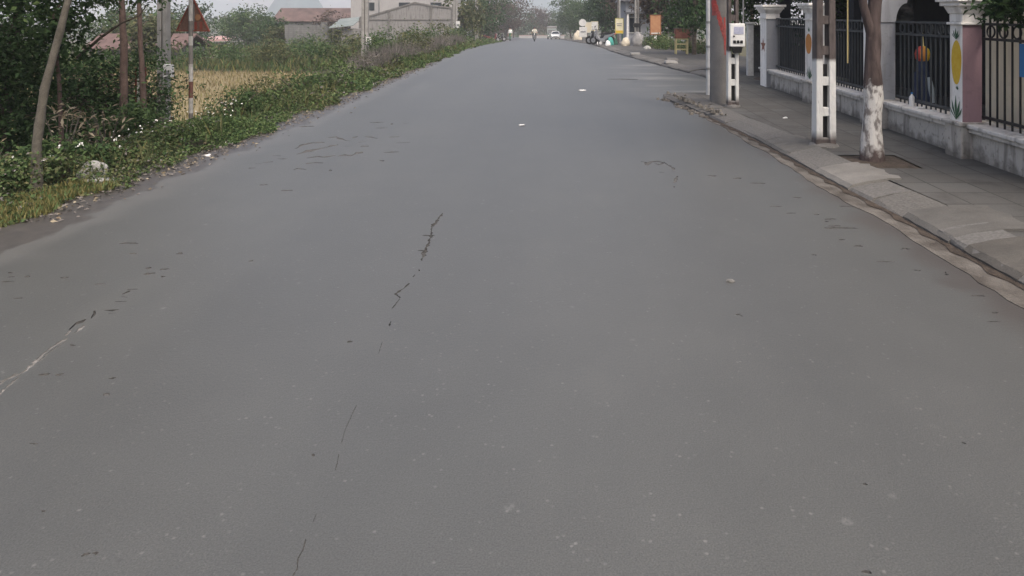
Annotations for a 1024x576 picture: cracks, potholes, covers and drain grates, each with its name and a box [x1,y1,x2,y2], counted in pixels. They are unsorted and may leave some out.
crack [264,122,407,170]
crack [0,289,134,395]
crack [293,343,382,576]
crack [389,213,443,326]
crack [644,161,678,188]
